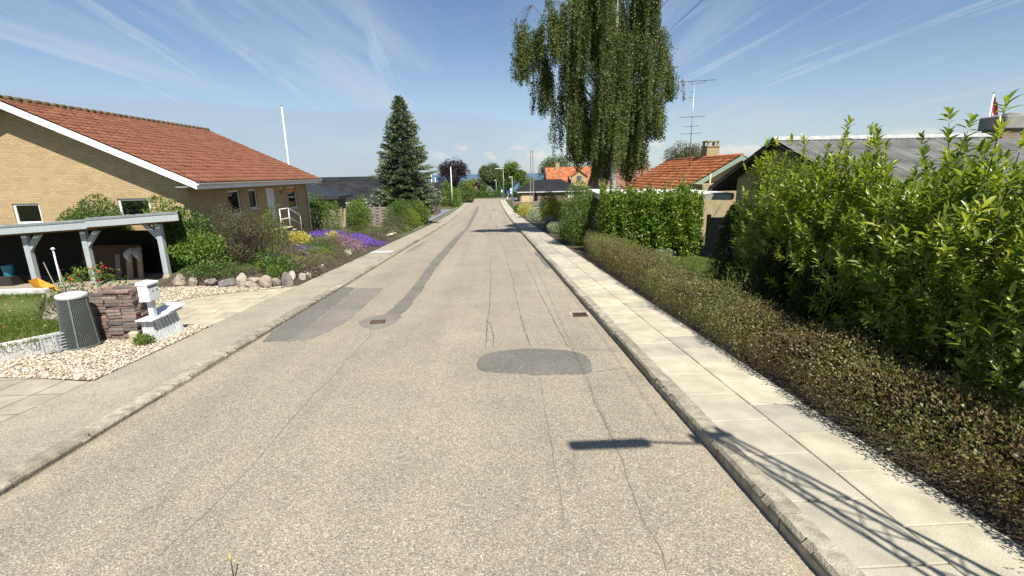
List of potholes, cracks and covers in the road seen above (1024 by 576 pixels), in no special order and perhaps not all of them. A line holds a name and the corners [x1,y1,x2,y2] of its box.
crack [588,379,667,571]
crack [485,205,567,348]
crack [540,379,564,524]
